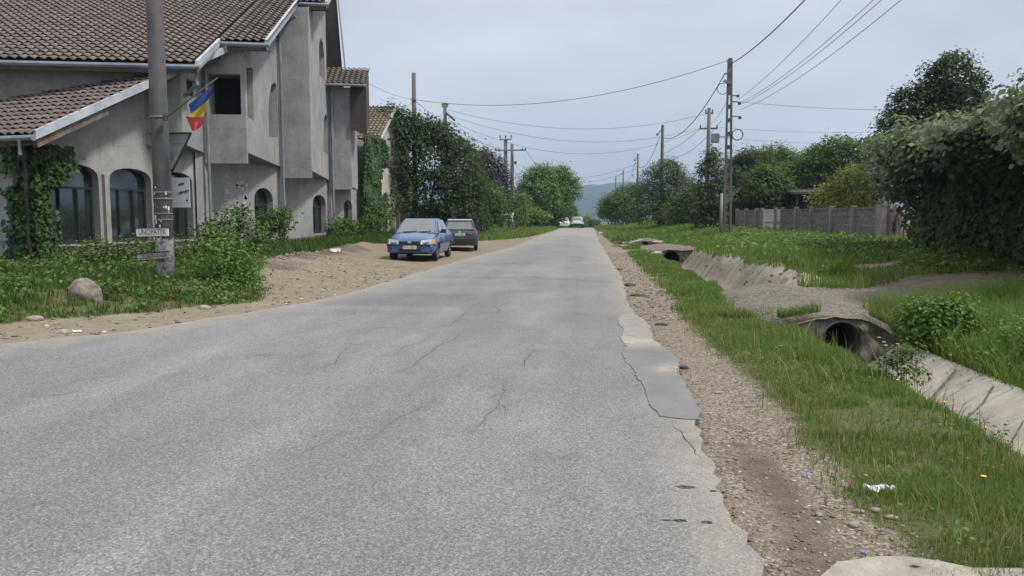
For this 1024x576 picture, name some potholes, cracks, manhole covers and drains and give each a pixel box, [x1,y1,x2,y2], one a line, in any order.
crack [401,297,499,365]
crack [471,350,535,433]
